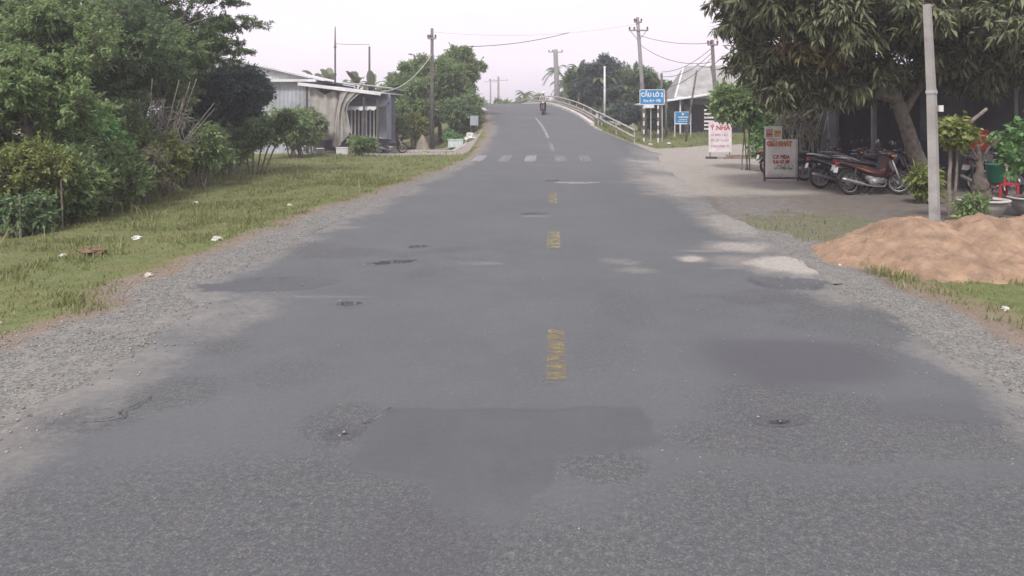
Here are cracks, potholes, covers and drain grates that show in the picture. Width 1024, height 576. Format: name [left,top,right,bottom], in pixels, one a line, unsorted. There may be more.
pothole [322,422,368,440]
pothole [356,258,429,266]
pothole [745,275,841,290]
pothole [328,300,372,308]
crack [81,396,152,422]
pothole [748,415,812,427]
